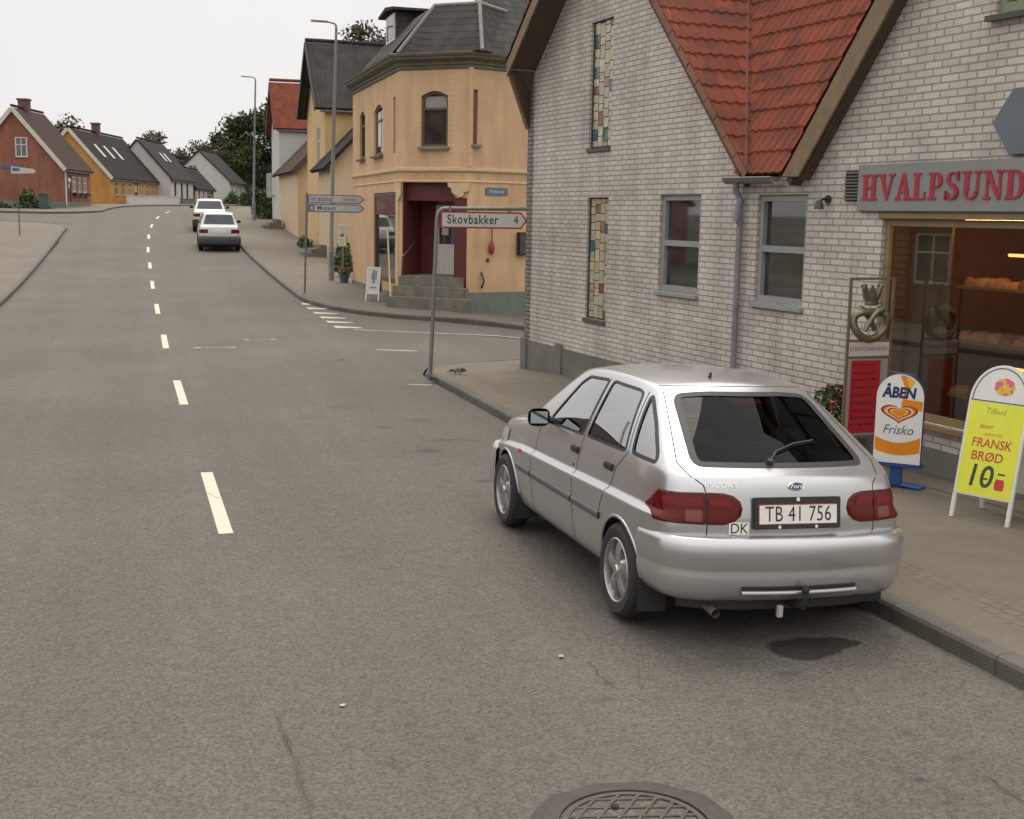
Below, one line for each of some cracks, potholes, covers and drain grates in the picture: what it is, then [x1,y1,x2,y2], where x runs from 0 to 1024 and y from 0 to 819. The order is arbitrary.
manhole cover [530,781,734,819]
crack [983,774,1024,803]
crack [588,661,617,689]
crack [274,716,313,819]
